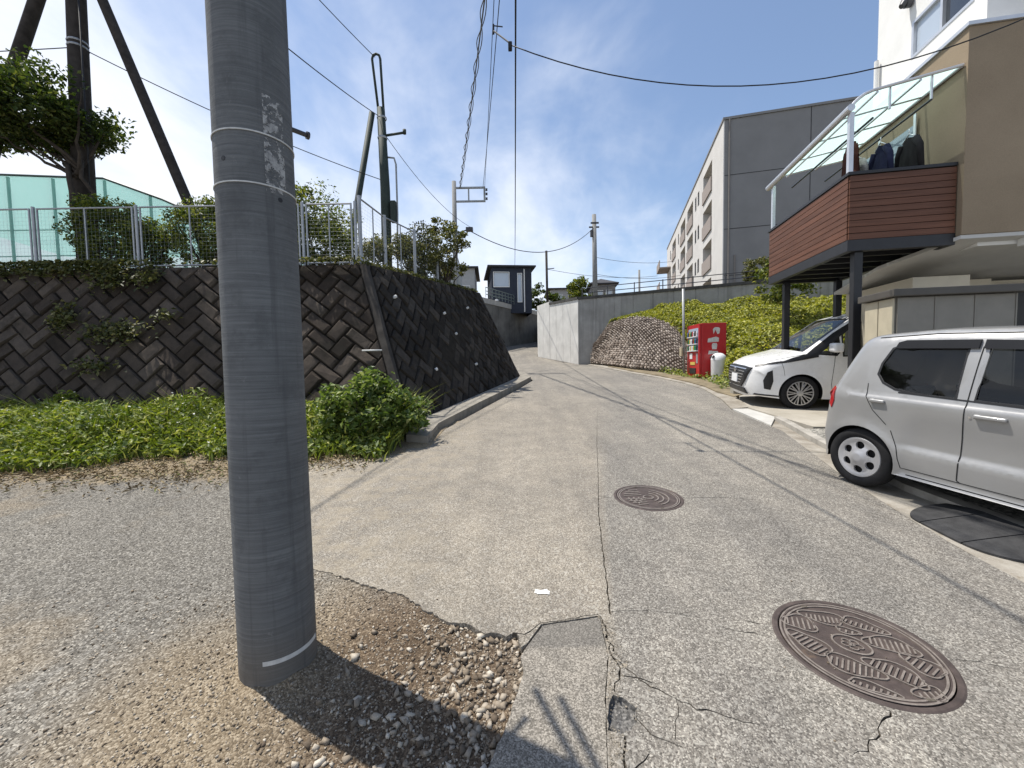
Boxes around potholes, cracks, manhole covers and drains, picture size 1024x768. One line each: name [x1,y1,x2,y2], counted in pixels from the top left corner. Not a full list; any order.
crack [853,711,892,755]
crack [512,413,758,768]
manhole cover [614,485,684,511]
pothole [607,695,638,736]
manhole cover [772,600,967,714]
